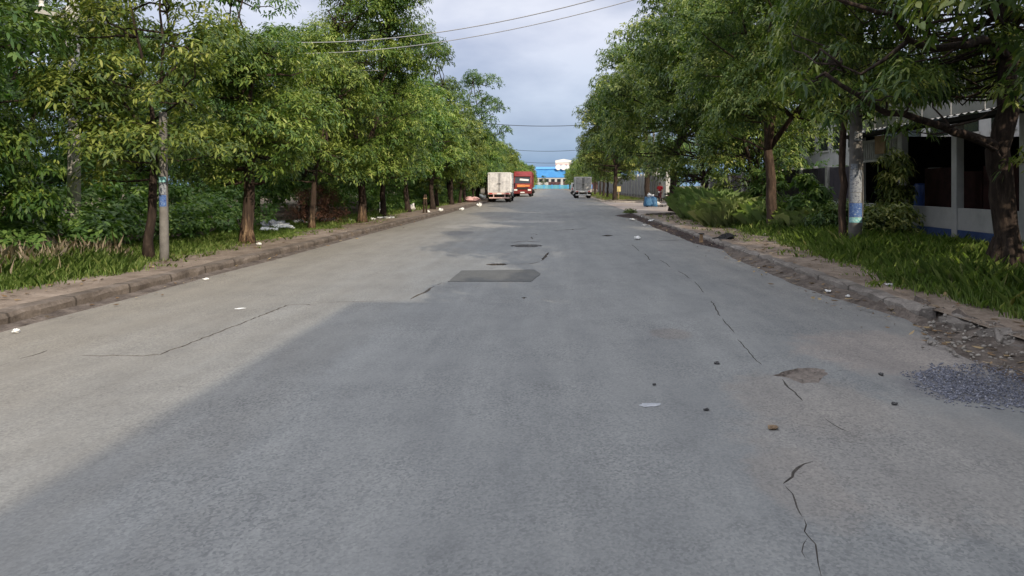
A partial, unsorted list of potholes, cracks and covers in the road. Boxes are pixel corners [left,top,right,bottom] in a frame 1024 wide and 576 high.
pothole [774,368,828,384]
crack [782,379,851,433]
crack [783,461,821,574]
